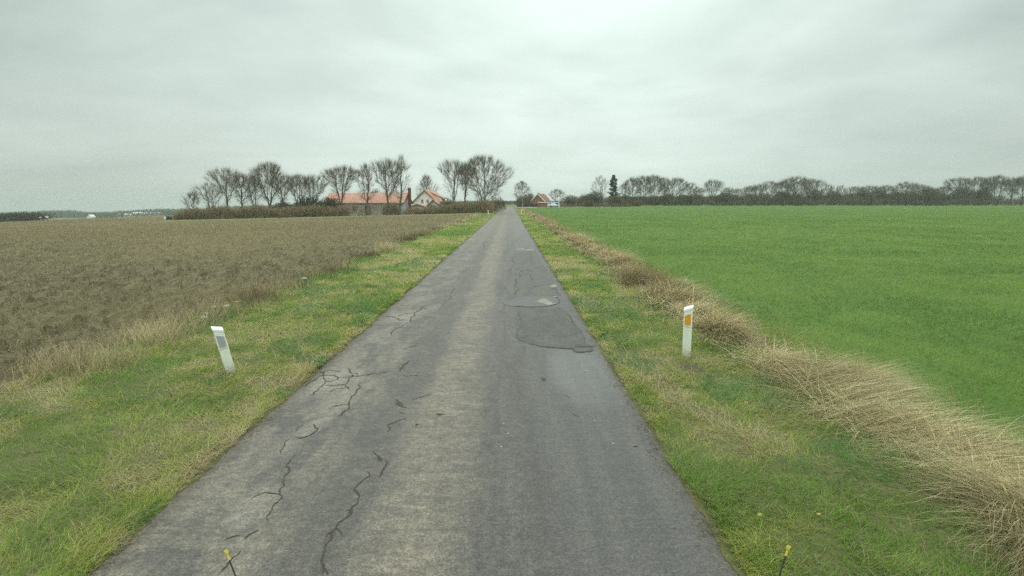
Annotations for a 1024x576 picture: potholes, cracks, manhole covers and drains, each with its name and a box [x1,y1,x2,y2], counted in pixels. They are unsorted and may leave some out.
crack [218,368,381,574]
crack [389,306,424,376]
